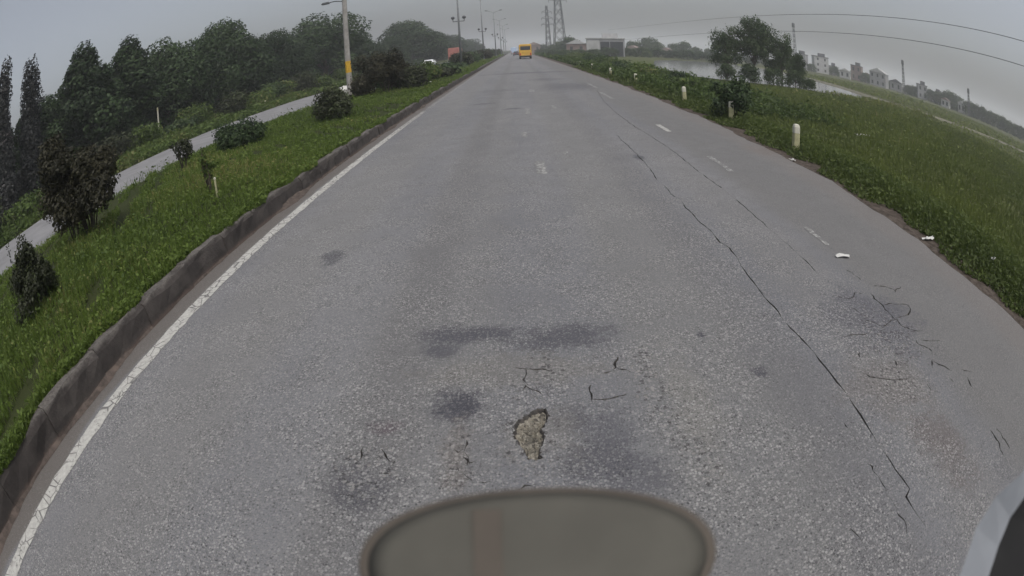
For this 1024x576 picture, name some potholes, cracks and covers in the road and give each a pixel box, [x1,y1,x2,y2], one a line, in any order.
crack [589,357,630,401]
crack [597,91,972,533]
crack [519,368,549,394]
pothole [513,408,550,461]
crack [454,441,490,483]
